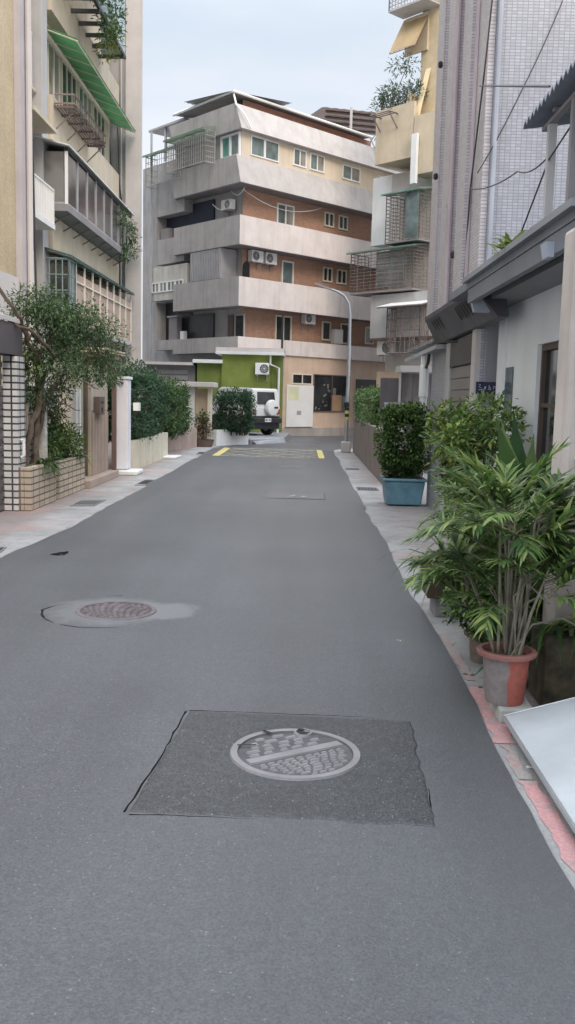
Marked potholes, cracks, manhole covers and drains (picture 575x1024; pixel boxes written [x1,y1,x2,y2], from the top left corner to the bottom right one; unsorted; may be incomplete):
manhole cover [229,728,361,781]
manhole cover [75,601,157,621]
